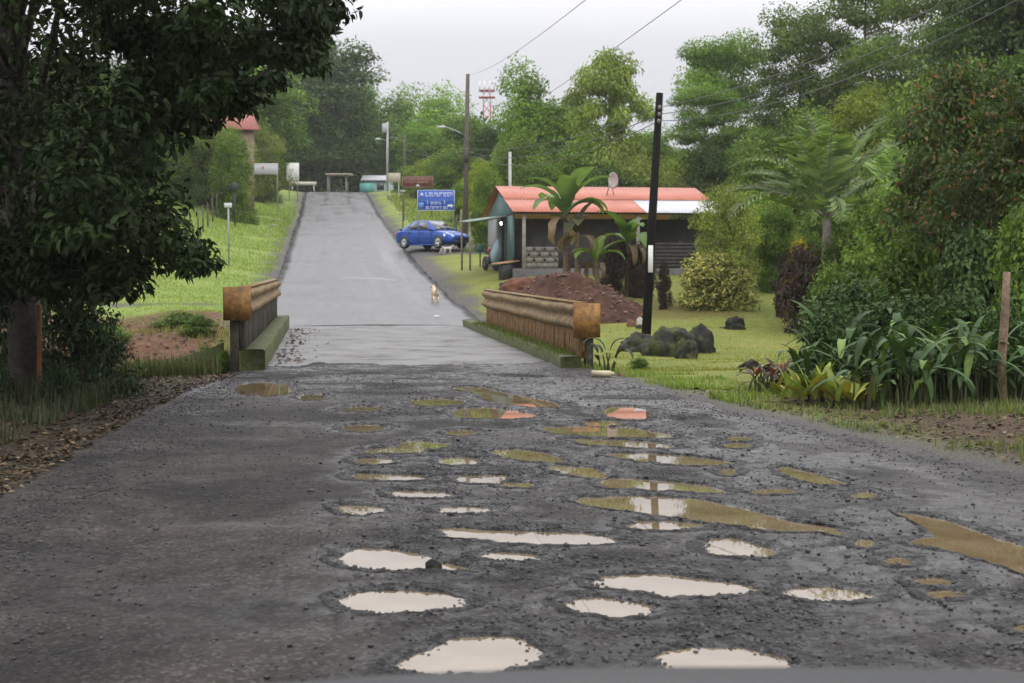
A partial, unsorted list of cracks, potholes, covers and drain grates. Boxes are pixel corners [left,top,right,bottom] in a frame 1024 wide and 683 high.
pothole [370,626,571,675]
pothole [766,579,899,604]
pothole [227,380,301,397]
pothole [541,589,679,622]
pothole [336,469,439,482]
pothole [685,532,795,560]
pothole [446,384,567,408]
pothole [888,508,1024,576]
pothole [374,486,472,500]
pothole [421,502,507,516]
pothole [461,546,559,563]
pothole [594,404,660,421]
